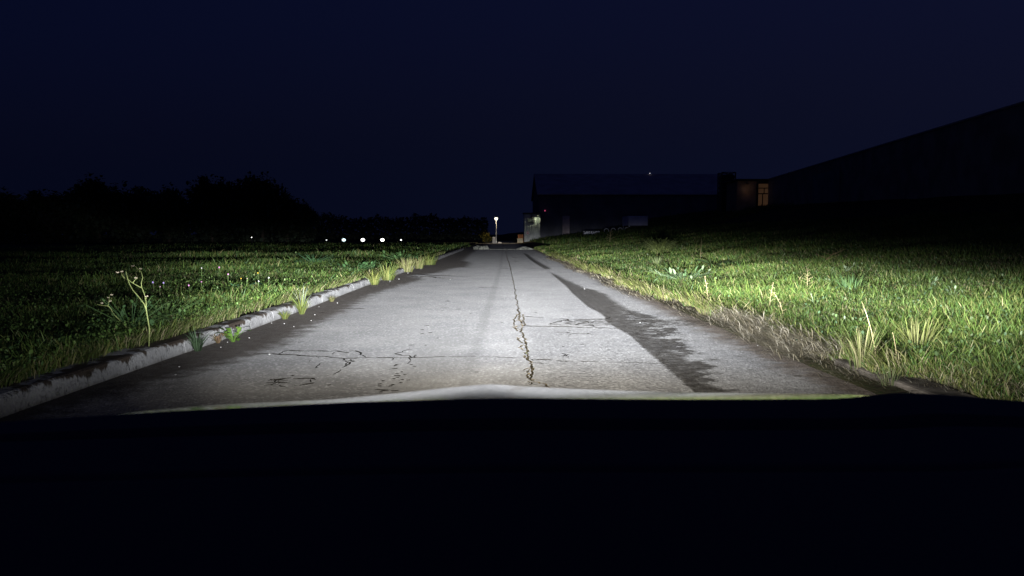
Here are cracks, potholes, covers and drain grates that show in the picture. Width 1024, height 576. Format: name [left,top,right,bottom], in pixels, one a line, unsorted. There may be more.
crack [525,312,615,335]
crack [254,341,513,387]
